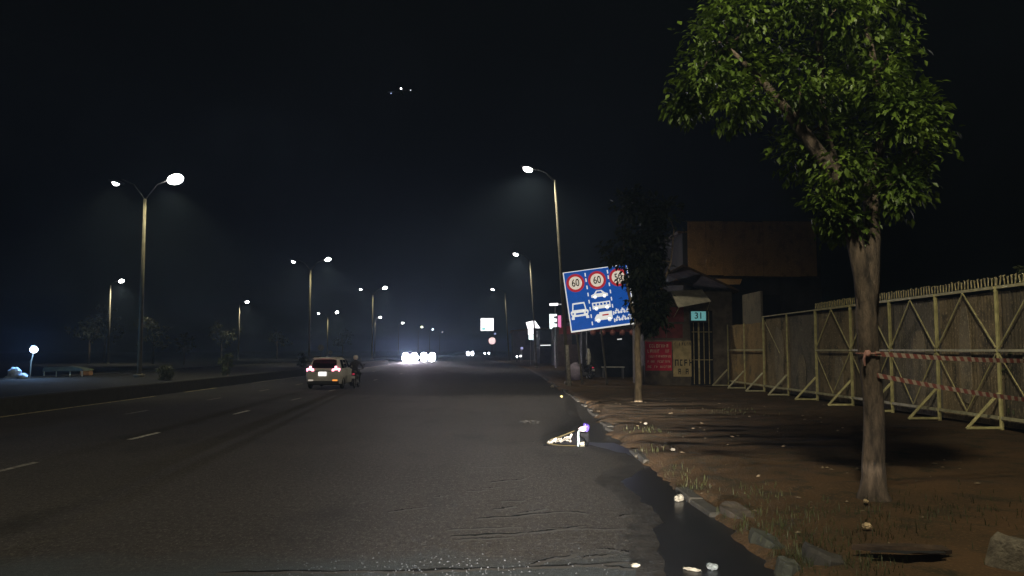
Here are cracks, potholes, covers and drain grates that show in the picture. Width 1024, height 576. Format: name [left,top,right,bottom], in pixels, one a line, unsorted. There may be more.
crack [215,441,638,575]
